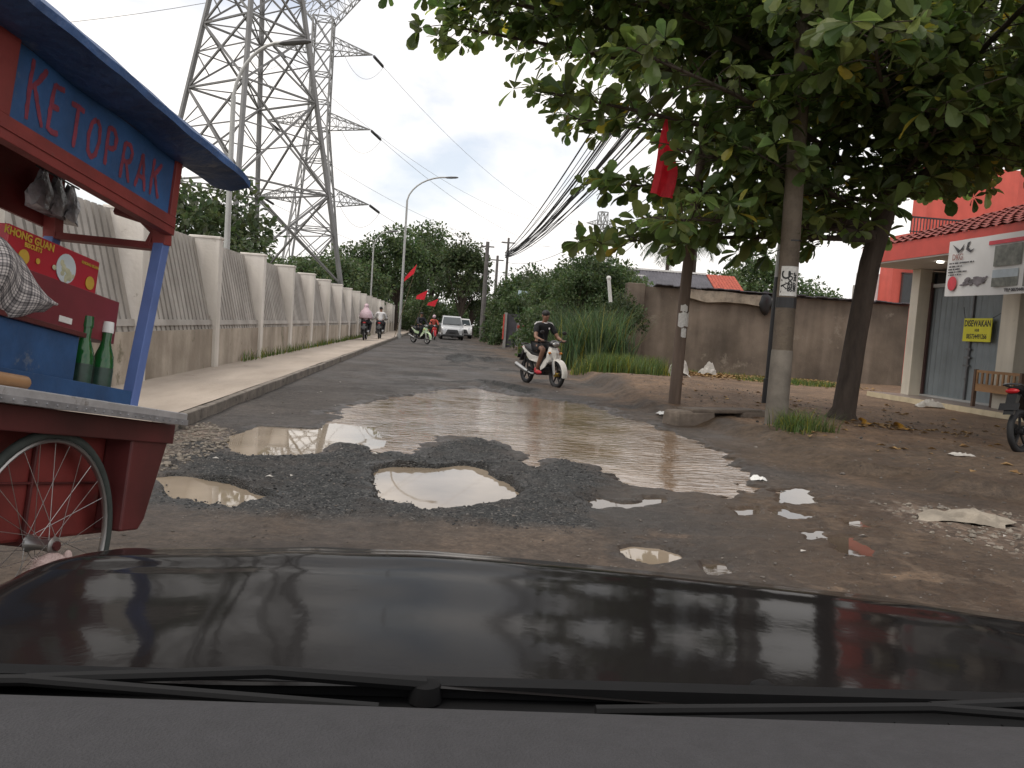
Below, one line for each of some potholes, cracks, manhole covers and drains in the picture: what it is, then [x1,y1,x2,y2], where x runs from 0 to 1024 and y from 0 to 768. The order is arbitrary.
pothole [220,425,334,454]
pothole [317,385,770,499]
pothole [581,491,672,509]
pothole [155,471,279,508]
pothole [368,459,526,507]
pothole [617,543,688,563]
